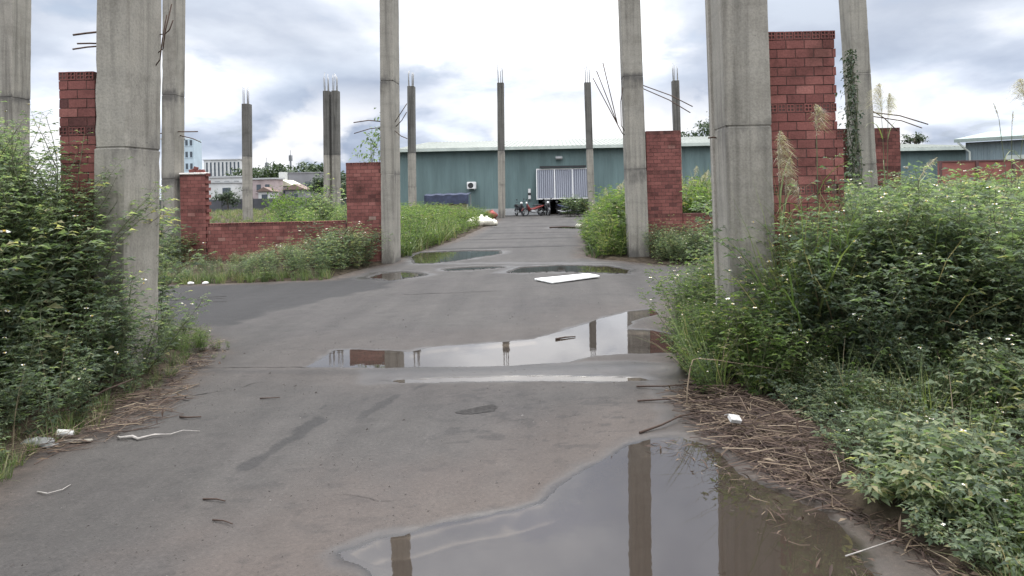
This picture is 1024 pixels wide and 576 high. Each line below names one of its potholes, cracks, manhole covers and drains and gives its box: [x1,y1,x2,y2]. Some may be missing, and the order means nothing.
pothole [506,265,633,274]
pothole [367,271,427,281]
pothole [409,250,502,264]
